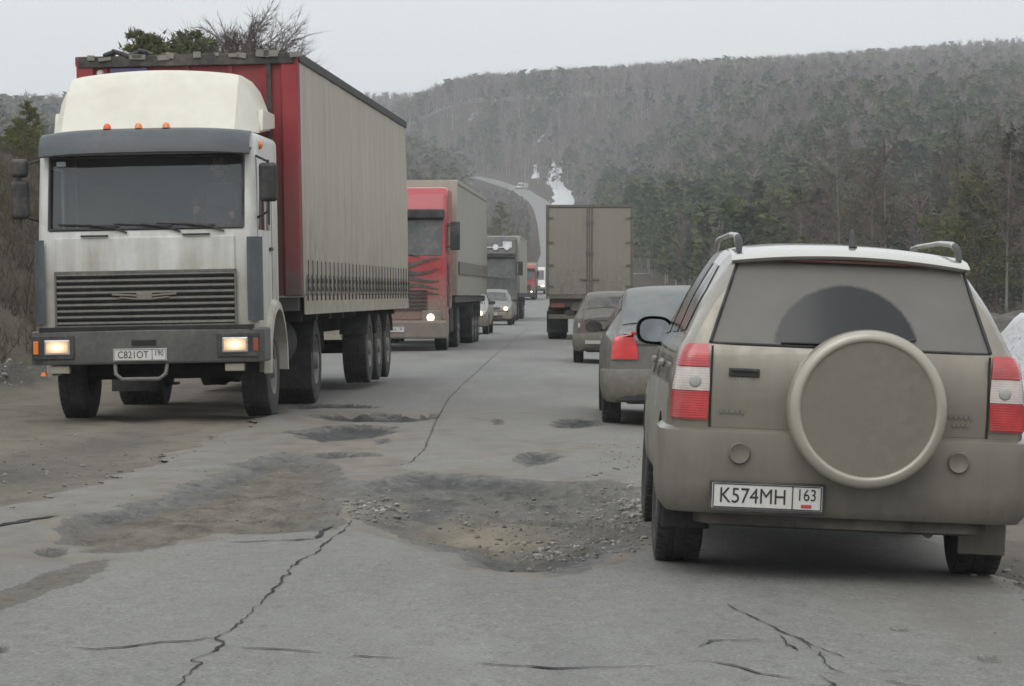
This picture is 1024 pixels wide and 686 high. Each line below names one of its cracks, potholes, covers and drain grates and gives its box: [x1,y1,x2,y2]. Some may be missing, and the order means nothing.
crack [78,521,352,686]
pothole [281,424,400,443]
crack [0,515,58,526]
pothole [305,451,385,459]
crack [680,639,795,678]
pothole [548,419,606,429]
crack [728,604,844,686]
pothole [305,413,441,423]
pothole [50,451,356,553]
pothole [346,471,652,576]
pothole [512,452,566,467]
pothole [33,547,69,558]
